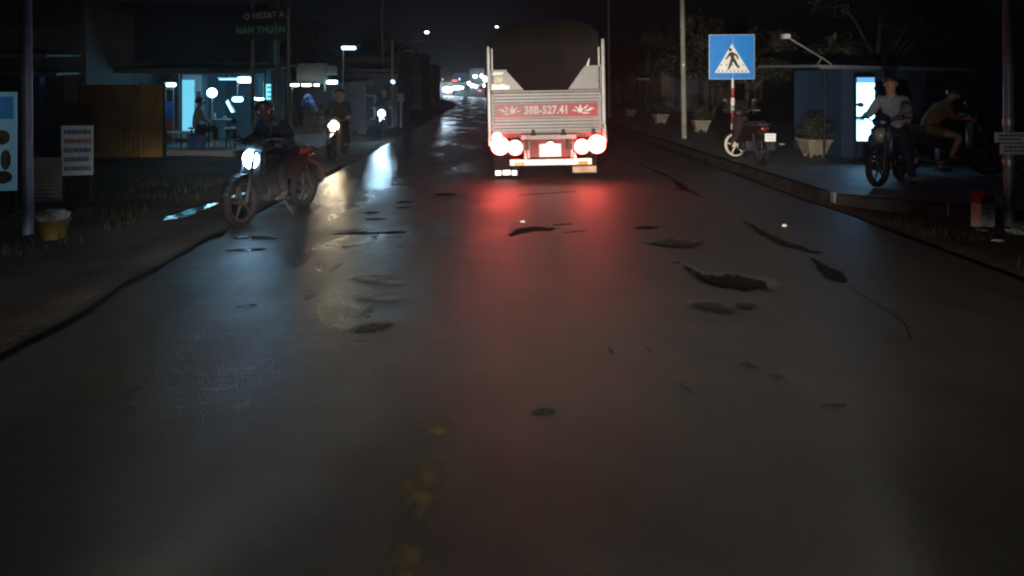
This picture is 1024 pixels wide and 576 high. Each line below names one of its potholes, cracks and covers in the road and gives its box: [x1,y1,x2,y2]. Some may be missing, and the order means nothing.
crack [848,286,911,338]
pothole [531,408,555,416]
pothole [509,227,554,237]
pothole [676,262,767,291]
pothole [808,256,847,283]
pothole [690,302,735,313]
pothole [649,238,707,248]
pothole [354,323,394,333]
